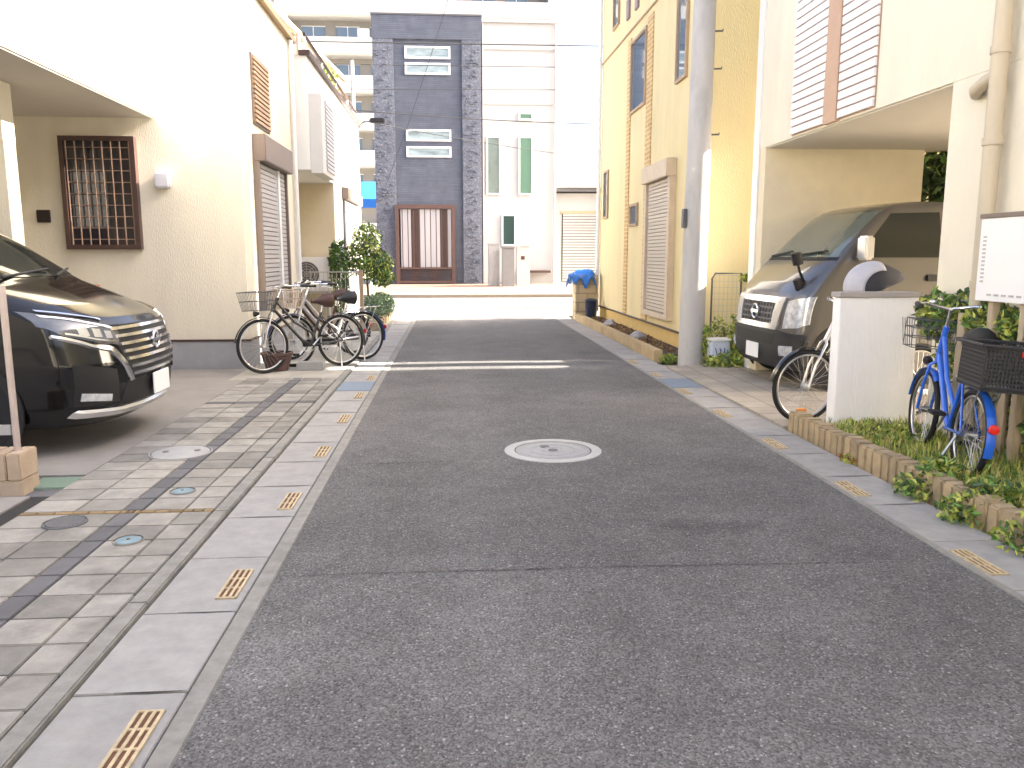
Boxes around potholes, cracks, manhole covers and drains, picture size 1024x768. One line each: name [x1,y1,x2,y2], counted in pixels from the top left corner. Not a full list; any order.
drain grate [761,438,788,449]
drain grate [949,549,1010,576]
manhole cover [148,445,213,460]
drain grate [313,446,332,458]
drain grate [833,481,872,497]
drain grate [215,569,254,600]
drain grate [277,492,302,510]
drain grate [98,709,166,768]
manhole cover [41,515,88,531]
manhole cover [112,534,145,546]
manhole cover [504,439,602,463]
manhole cover [169,487,196,495]
